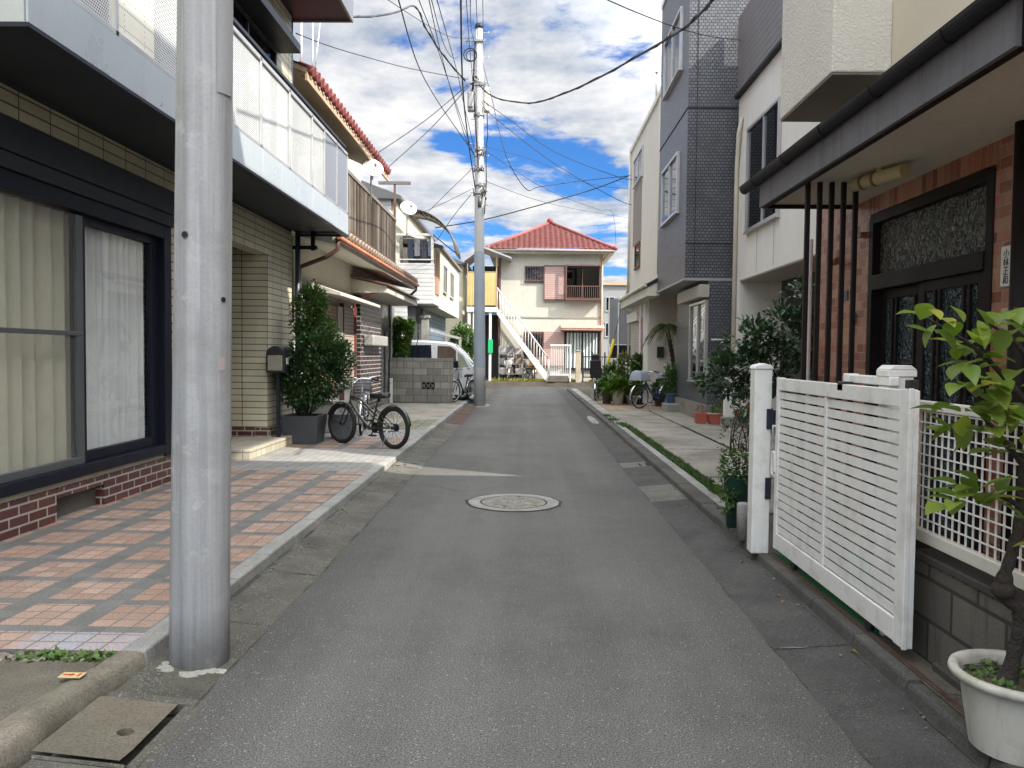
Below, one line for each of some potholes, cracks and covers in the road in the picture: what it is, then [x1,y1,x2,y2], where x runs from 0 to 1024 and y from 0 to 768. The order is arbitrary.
manhole cover [465,493,562,512]
